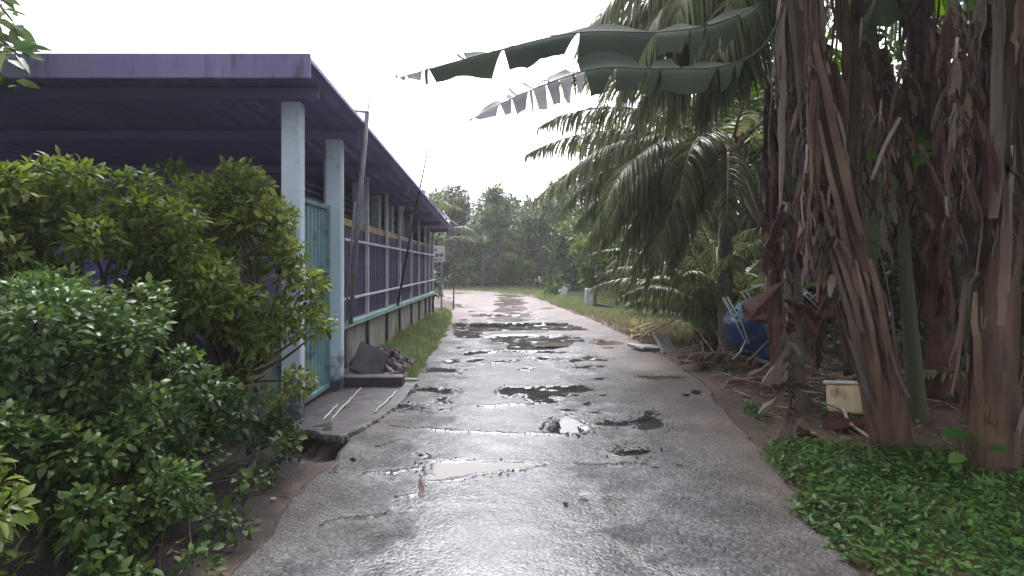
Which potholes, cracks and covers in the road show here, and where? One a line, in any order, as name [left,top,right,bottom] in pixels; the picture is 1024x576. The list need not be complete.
pothole [412,386,457,395]
pothole [449,322,593,339]
pothole [495,385,596,404]
pothole [591,410,668,431]
pothole [420,459,552,483]
pothole [610,449,658,457]
pothole [481,334,600,351]
pothole [543,416,593,435]
crack [319,493,419,526]
